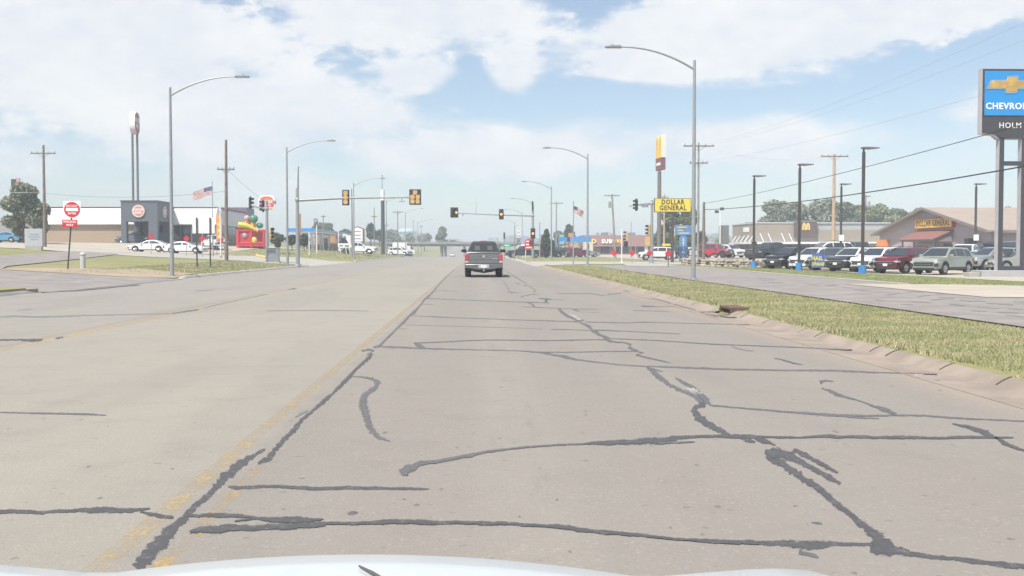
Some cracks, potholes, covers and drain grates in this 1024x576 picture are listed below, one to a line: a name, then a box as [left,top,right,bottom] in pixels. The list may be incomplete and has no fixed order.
crack [362,280,937,374]
crack [399,404,1024,475]
drain grate [719,305,749,314]
crack [757,539,871,550]
